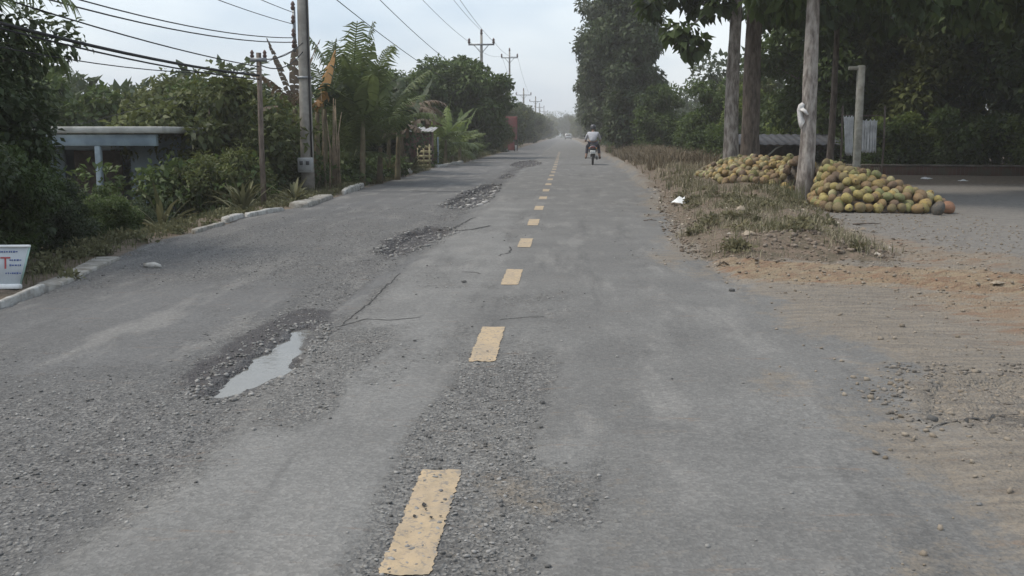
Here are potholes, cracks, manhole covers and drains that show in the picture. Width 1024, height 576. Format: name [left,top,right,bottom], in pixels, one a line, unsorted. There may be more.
crack [337,275,418,327]
pothole [512,160,540,168]
pothole [199,323,323,404]
pothole [377,227,454,256]
pothole [439,184,499,210]
crack [449,217,489,232]
